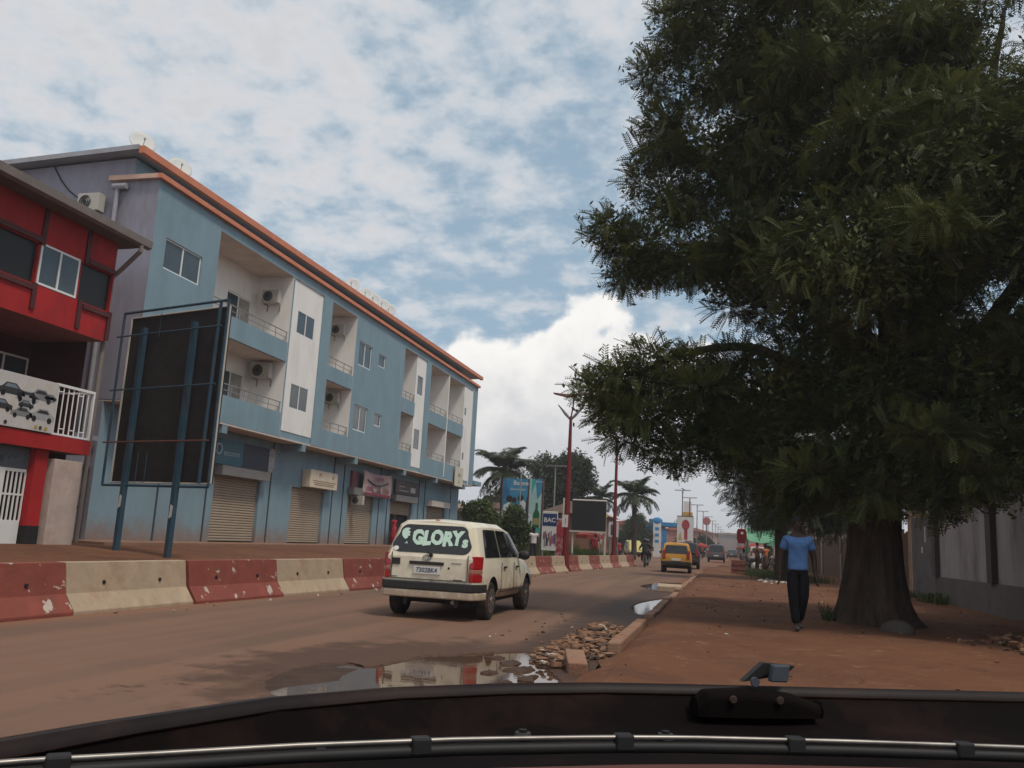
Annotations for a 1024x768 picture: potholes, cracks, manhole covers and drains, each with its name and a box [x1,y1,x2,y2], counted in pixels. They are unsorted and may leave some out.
pothole [258,651,564,694]
